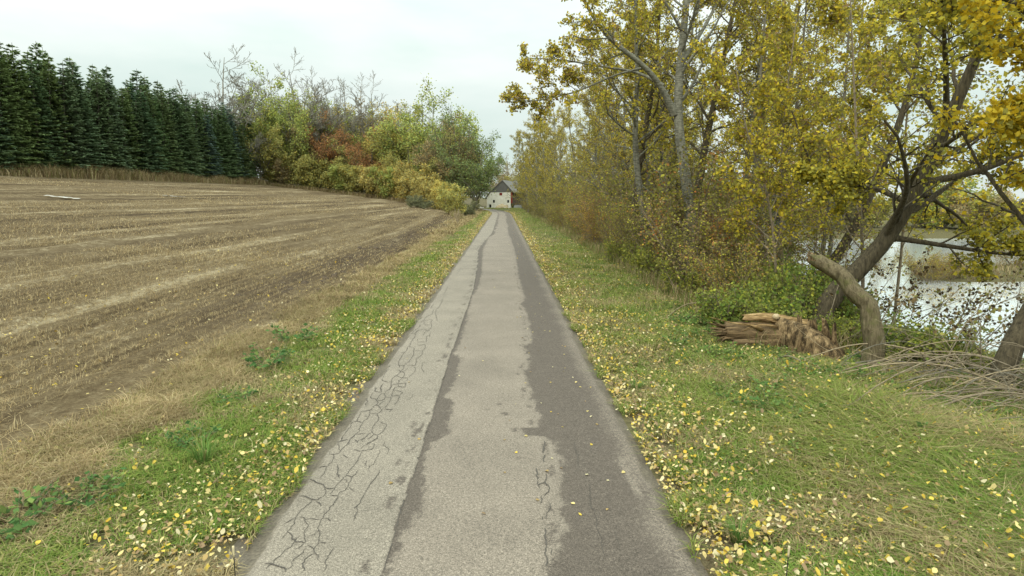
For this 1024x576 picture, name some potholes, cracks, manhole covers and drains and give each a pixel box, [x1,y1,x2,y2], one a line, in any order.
crack [266,269,463,572]
crack [535,441,552,566]
